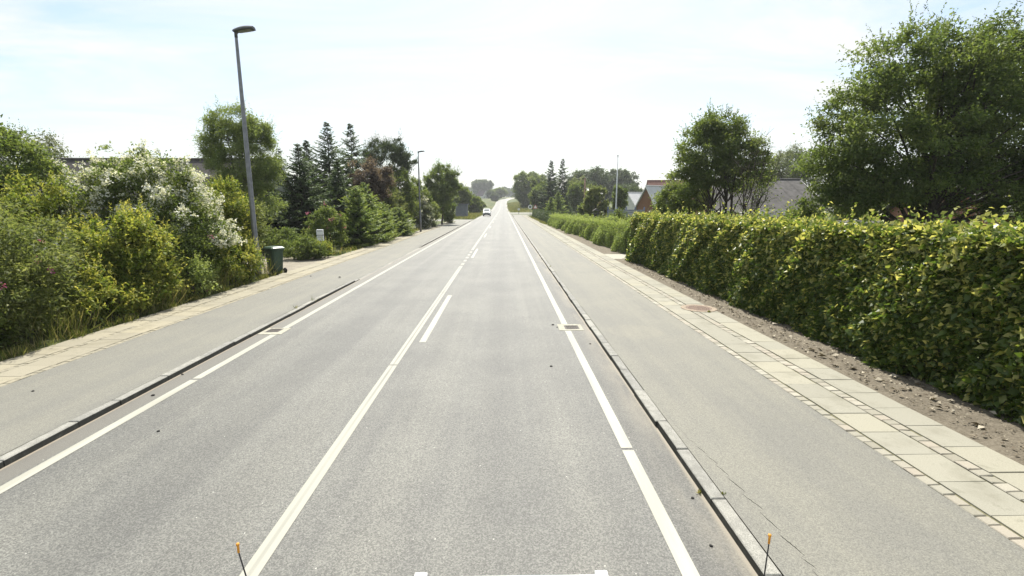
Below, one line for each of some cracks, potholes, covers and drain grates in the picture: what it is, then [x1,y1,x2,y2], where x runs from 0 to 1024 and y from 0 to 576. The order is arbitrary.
manhole cover [681,304,717,312]
crack [656,404,817,575]
